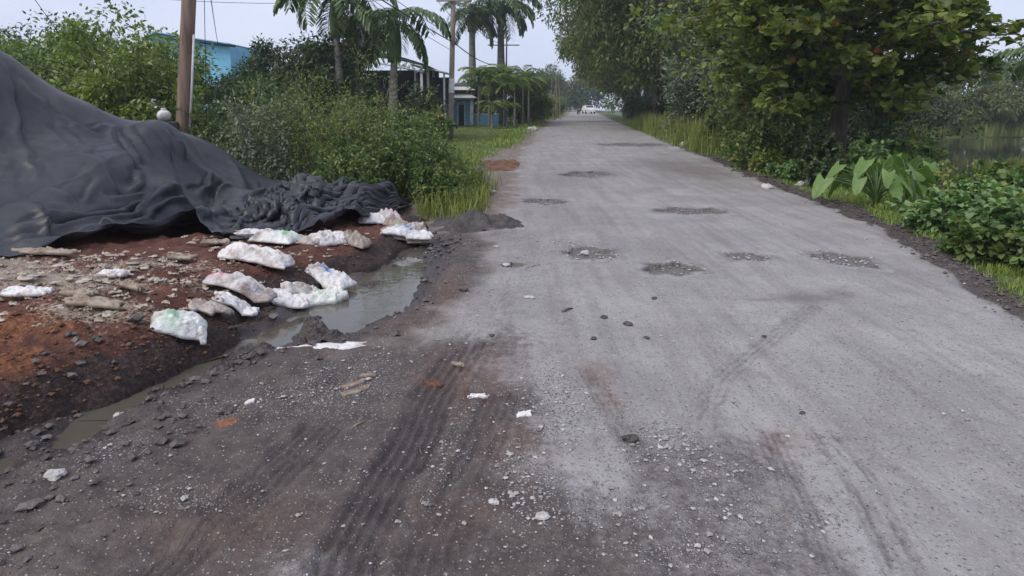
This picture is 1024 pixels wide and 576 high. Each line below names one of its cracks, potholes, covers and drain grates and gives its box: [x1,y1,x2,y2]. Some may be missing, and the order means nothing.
pothole [640,206,741,216]
pothole [551,170,624,179]
pothole [629,258,721,280]
pothole [795,249,895,273]
pothole [512,197,582,207]
pothole [710,250,787,265]
pothole [550,245,632,263]
